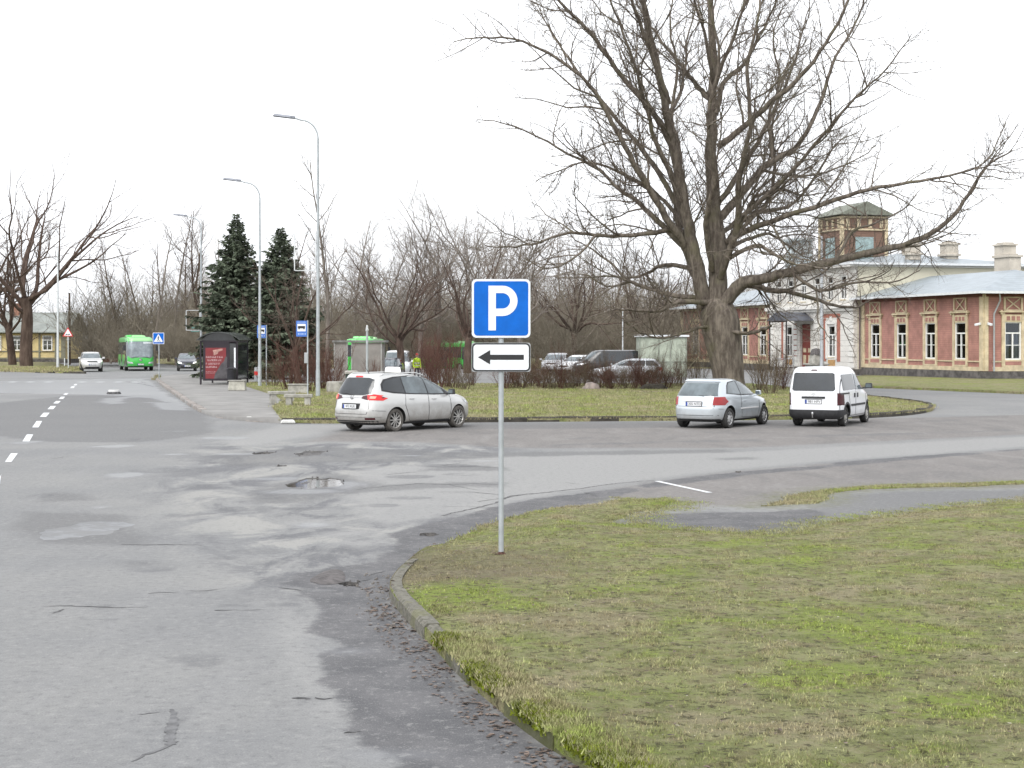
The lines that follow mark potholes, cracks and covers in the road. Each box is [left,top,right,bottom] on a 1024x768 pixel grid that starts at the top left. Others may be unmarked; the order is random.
crack [41,605,124,613]
pothole [285,476,344,489]
